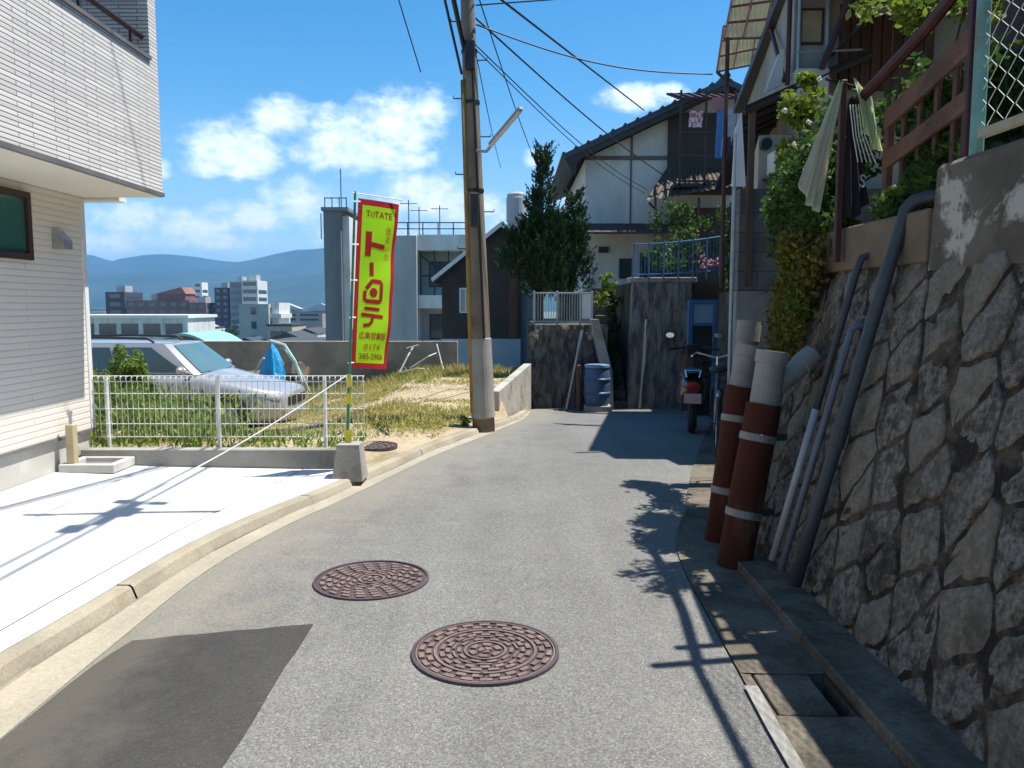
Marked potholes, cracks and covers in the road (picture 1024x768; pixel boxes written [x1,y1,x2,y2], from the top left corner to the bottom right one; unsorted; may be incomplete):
manhole cover [313,560,429,601]
manhole cover [411,620,559,687]
manhole cover [364,441,398,452]
